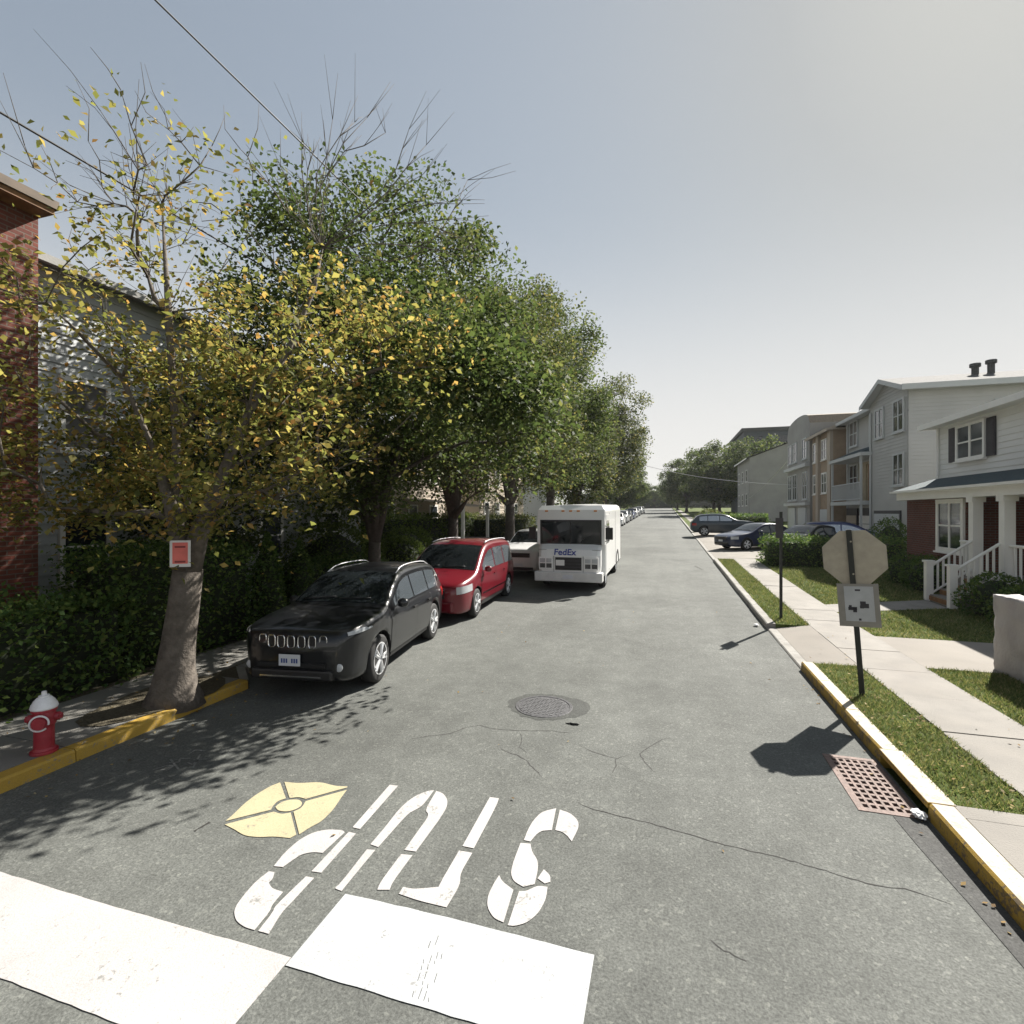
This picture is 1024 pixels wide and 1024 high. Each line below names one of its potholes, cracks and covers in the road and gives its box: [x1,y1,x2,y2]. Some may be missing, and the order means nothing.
drain grate [822,753,923,820]
crack [579,803,950,904]
manhole cover [515,696,573,718]
crack [412,725,669,775]
